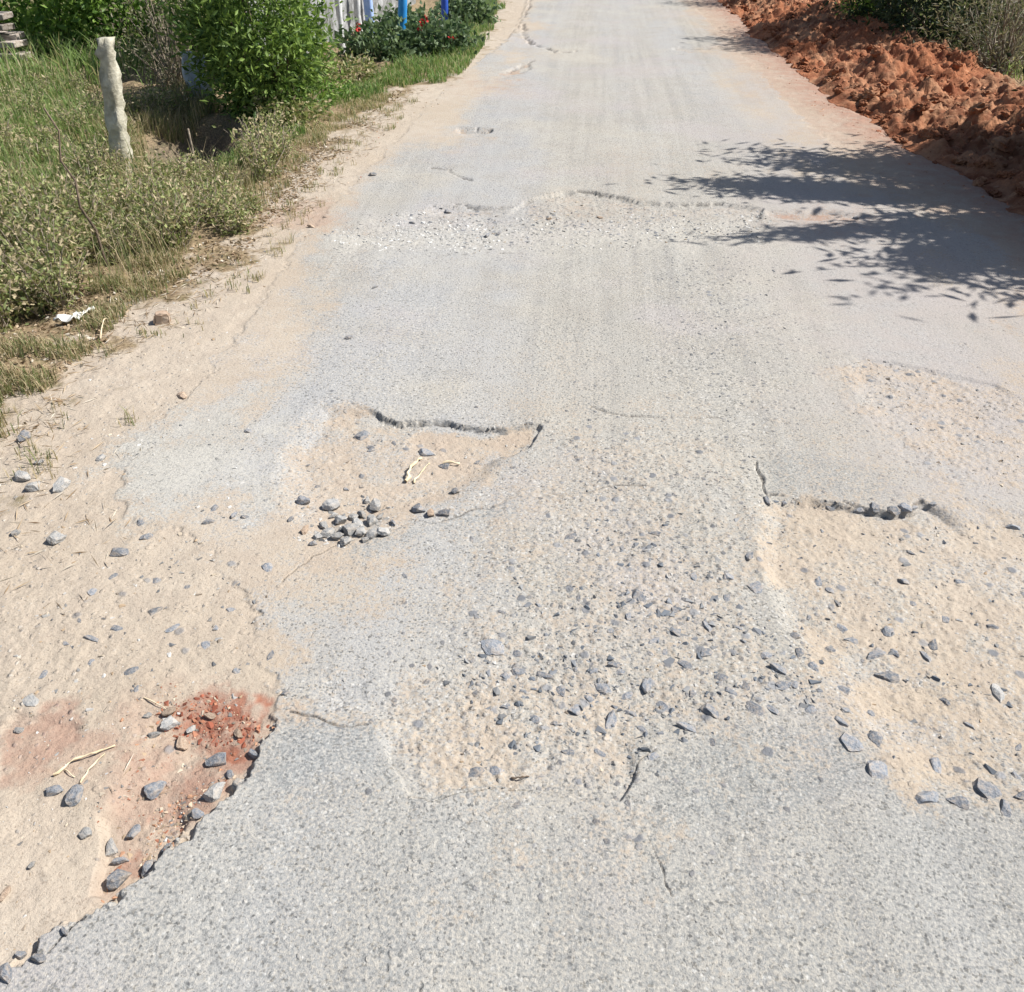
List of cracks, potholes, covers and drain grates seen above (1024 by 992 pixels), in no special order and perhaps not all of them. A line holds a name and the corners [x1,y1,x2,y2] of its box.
pothole [321,190,768,252]
crack [755,459,807,498]
pothole [268,396,544,551]
crack [288,709,371,728]
pothole [85,681,288,906]
pothole [812,353,1024,487]
crack [430,167,473,181]
pothole [752,494,1024,813]
crack [625,747,674,898]
